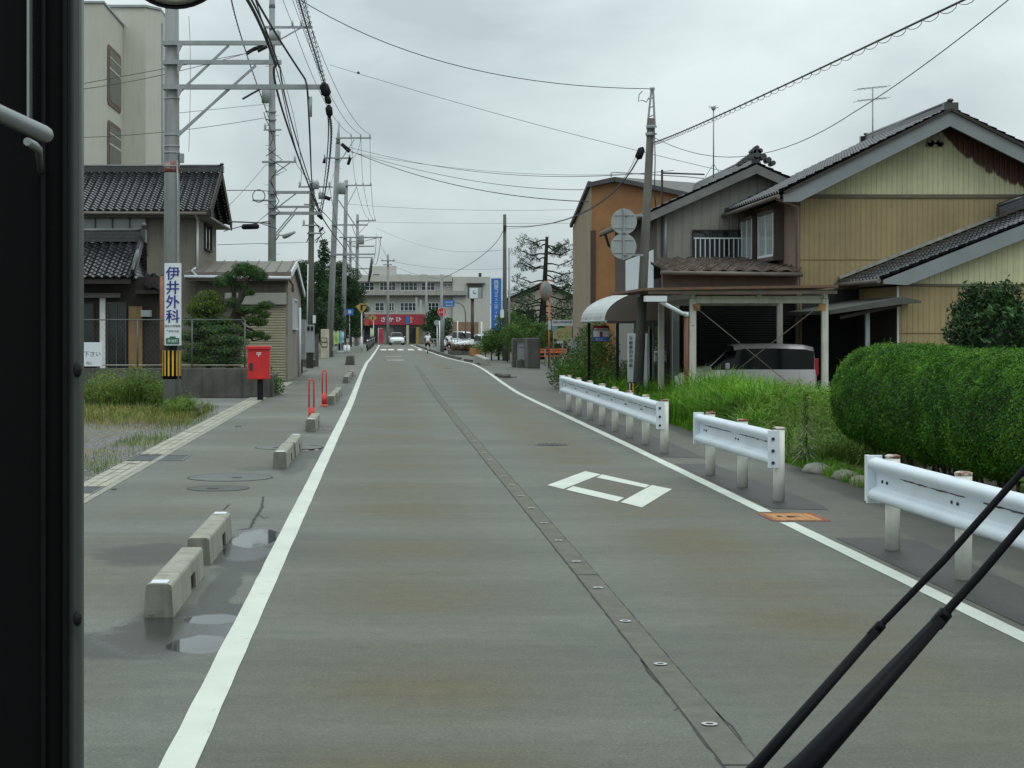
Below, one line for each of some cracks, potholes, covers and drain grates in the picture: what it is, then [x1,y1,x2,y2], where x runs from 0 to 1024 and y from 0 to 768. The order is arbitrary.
crack [223,496,267,529]
manhole cover [187,473,273,481]
